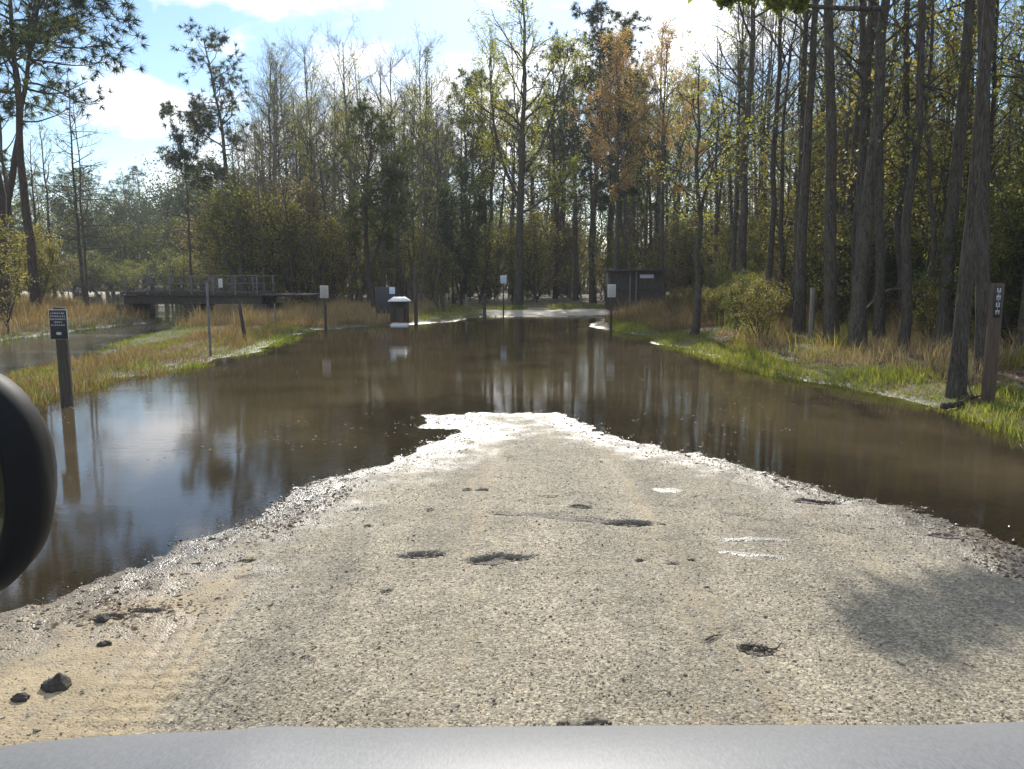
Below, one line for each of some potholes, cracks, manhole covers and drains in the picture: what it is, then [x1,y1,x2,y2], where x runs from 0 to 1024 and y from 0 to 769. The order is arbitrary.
pothole [397,550,446,559]
pothole [466,552,539,566]
pothole [736,644,776,657]
